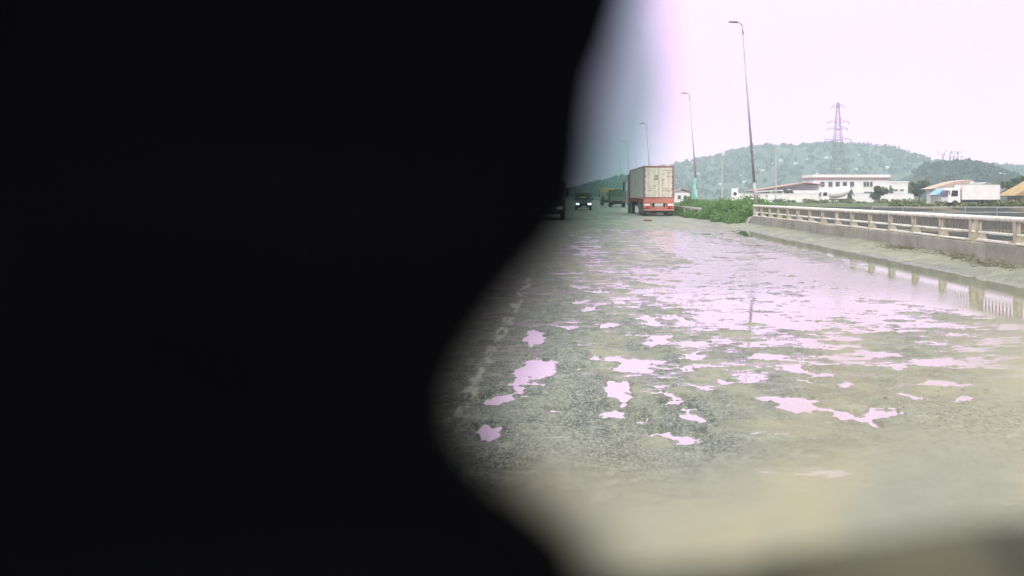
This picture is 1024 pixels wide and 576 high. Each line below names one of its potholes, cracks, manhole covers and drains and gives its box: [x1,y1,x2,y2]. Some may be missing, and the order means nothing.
pothole [675,405,715,424]
pothole [861,404,911,420]
pothole [826,409,884,432]
pothole [634,426,711,445]
pothole [749,391,840,416]
pothole [505,352,564,398]
pothole [521,328,552,347]
pothole [597,378,633,408]
